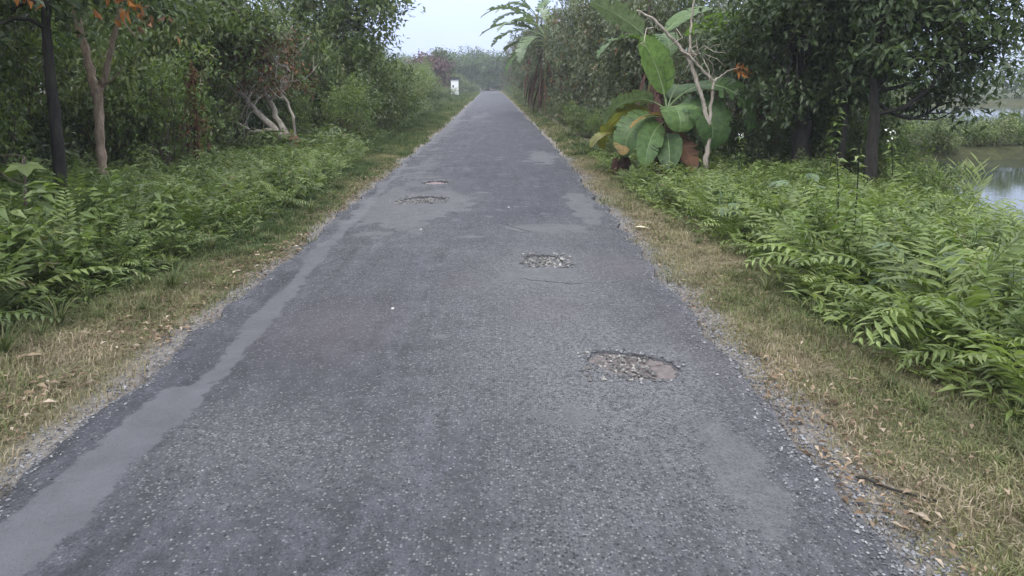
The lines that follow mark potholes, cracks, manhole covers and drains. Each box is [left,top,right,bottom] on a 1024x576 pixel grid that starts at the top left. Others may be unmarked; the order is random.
pothole [517,251,575,268]
pothole [389,195,453,205]
pothole [574,346,689,383]
